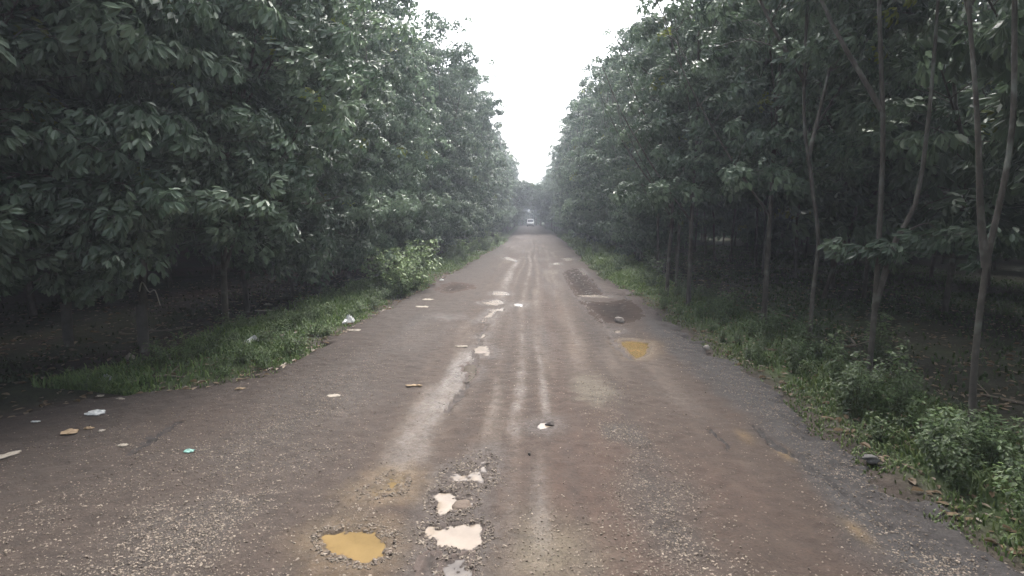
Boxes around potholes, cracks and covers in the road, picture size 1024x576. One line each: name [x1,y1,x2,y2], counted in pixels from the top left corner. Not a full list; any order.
pothole [535,419,554,431]
pothole [428,488,480,520]
crack [444,325,489,413]
pothole [470,345,495,357]
pothole [420,518,487,556]
pothole [357,468,412,501]
crack [749,424,895,531]
crack [706,429,731,452]
pothole [433,455,498,491]
pothole [317,527,394,565]
pothole [433,550,476,576]
pothole [618,339,652,360]
